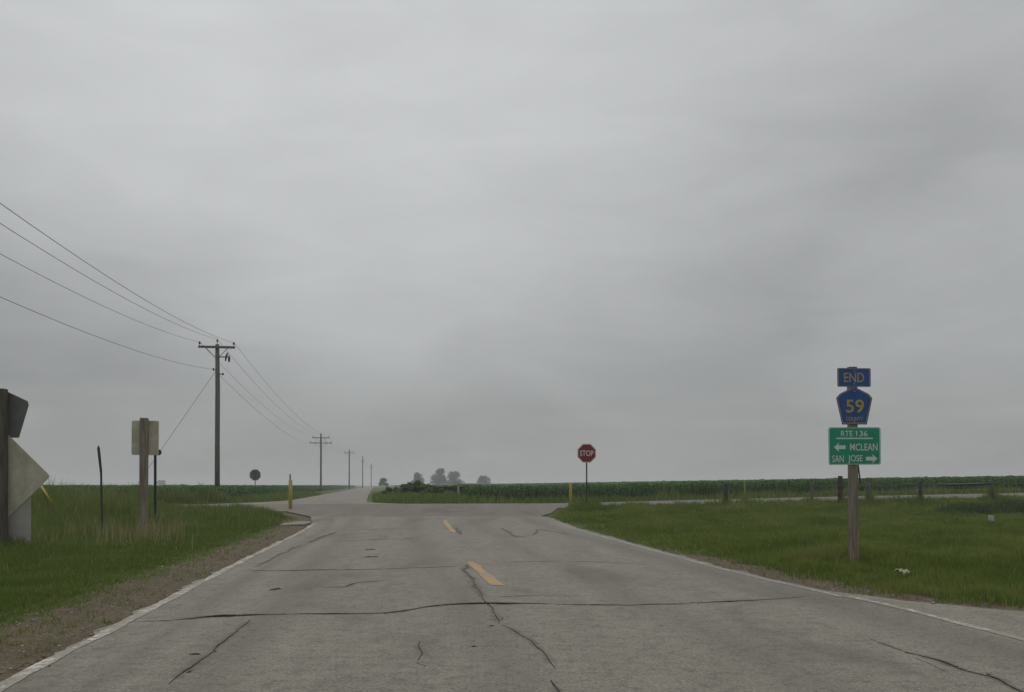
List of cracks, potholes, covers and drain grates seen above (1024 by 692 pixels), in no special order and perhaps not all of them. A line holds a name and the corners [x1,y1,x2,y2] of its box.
crack [871,639,1022,692]
crack [138,533,805,692]
